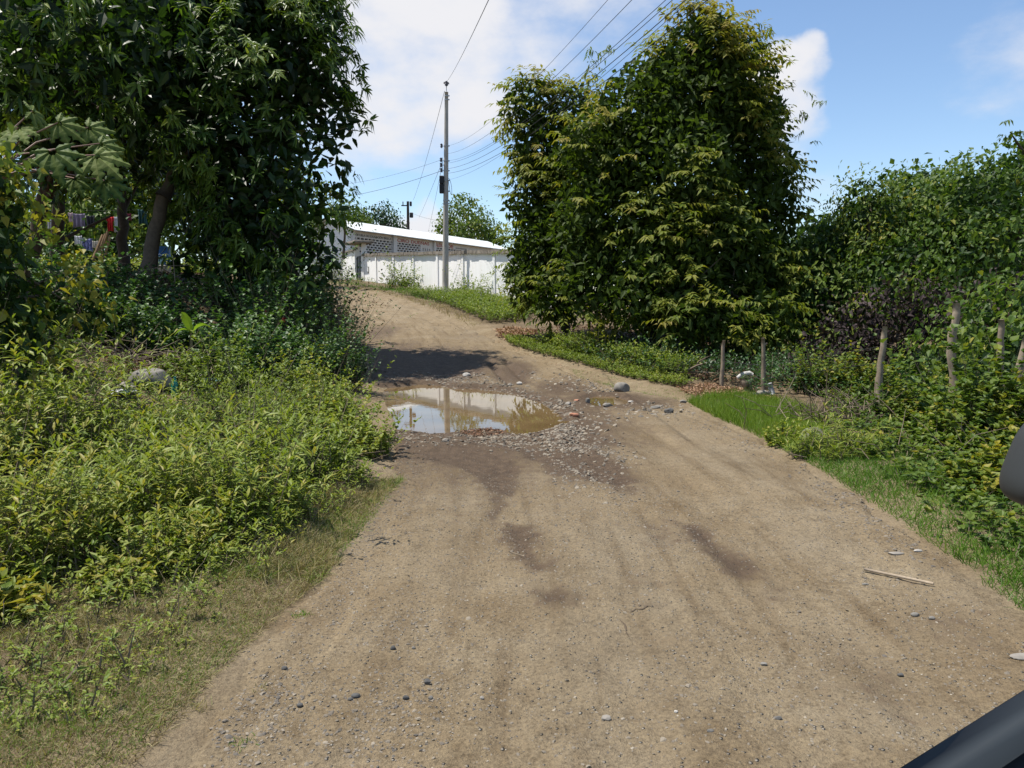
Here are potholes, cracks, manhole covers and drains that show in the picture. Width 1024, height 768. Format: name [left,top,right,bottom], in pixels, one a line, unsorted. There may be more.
pothole [584,393,632,406]
pothole [381,384,569,434]
